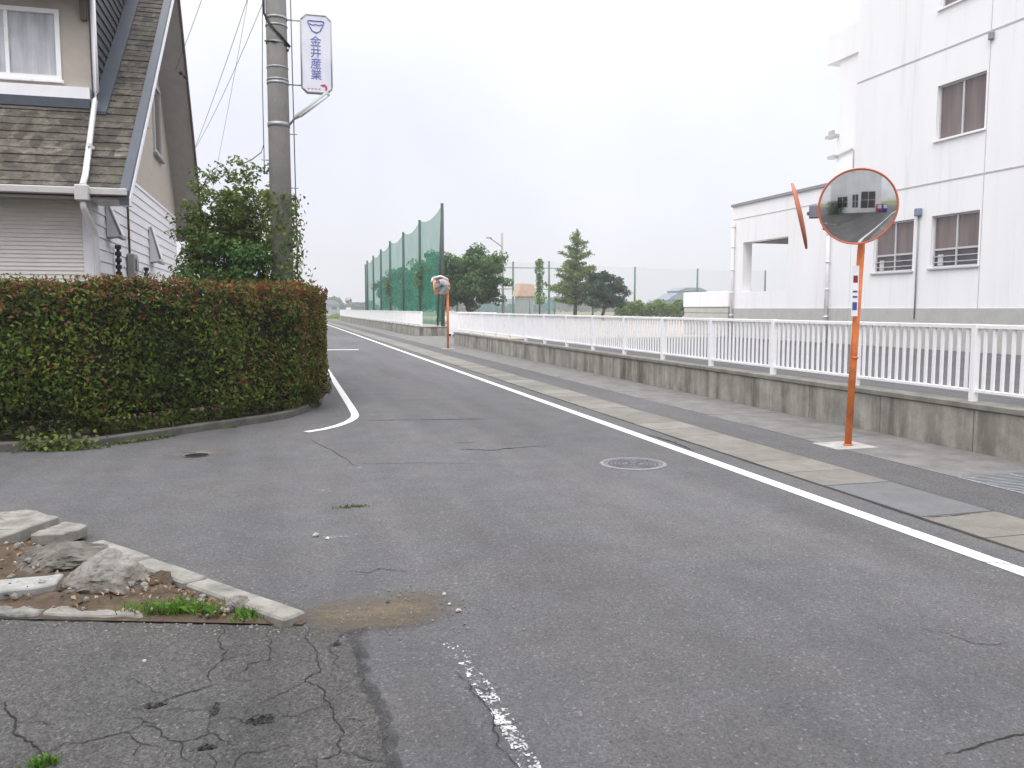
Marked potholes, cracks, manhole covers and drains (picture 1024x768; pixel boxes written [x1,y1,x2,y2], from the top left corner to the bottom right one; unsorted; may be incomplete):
crack [50,627,386,768]
crack [4,700,57,766]
drain grate [956,472,1024,494]
manhole cover [600,457,667,470]
crack [944,733,1024,754]
